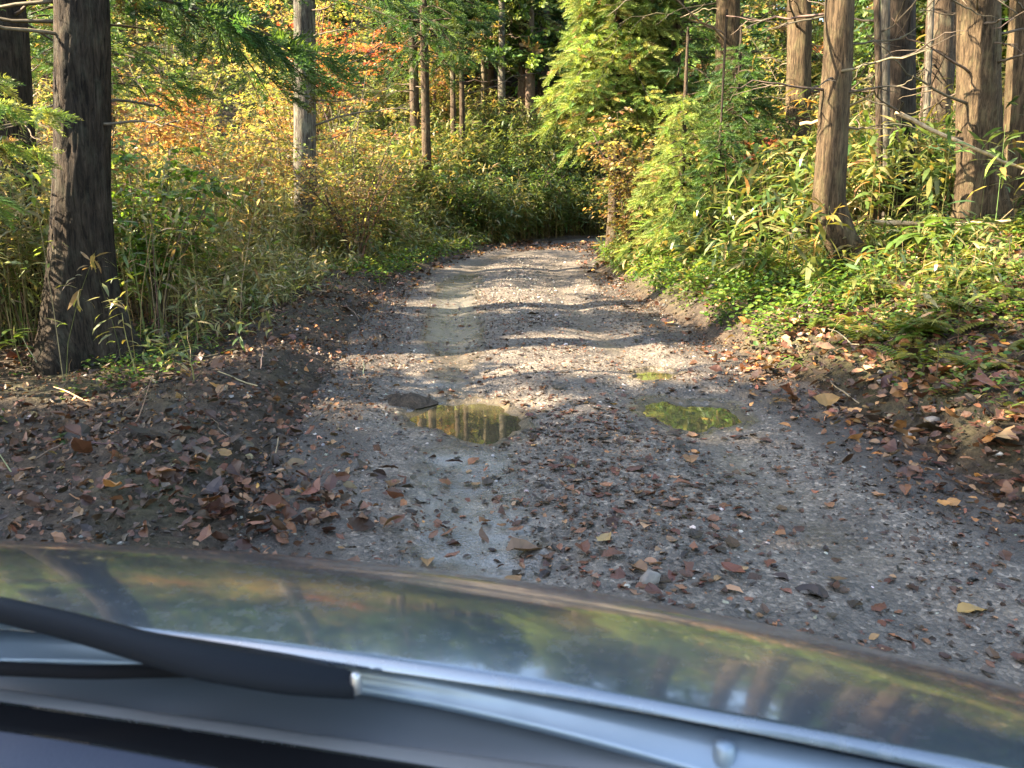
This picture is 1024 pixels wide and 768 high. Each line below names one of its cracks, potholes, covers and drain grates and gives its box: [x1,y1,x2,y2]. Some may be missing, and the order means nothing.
pothole [628,366,686,381]
pothole [633,395,755,434]
pothole [392,396,536,448]
